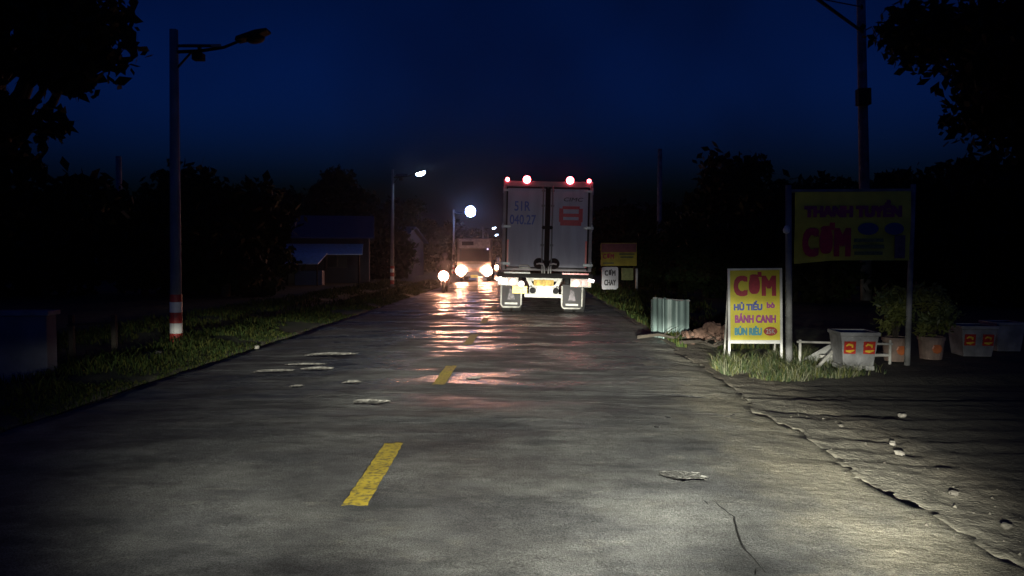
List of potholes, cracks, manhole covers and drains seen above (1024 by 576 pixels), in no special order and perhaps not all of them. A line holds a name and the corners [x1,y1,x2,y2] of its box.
pothole [659,470,708,481]
